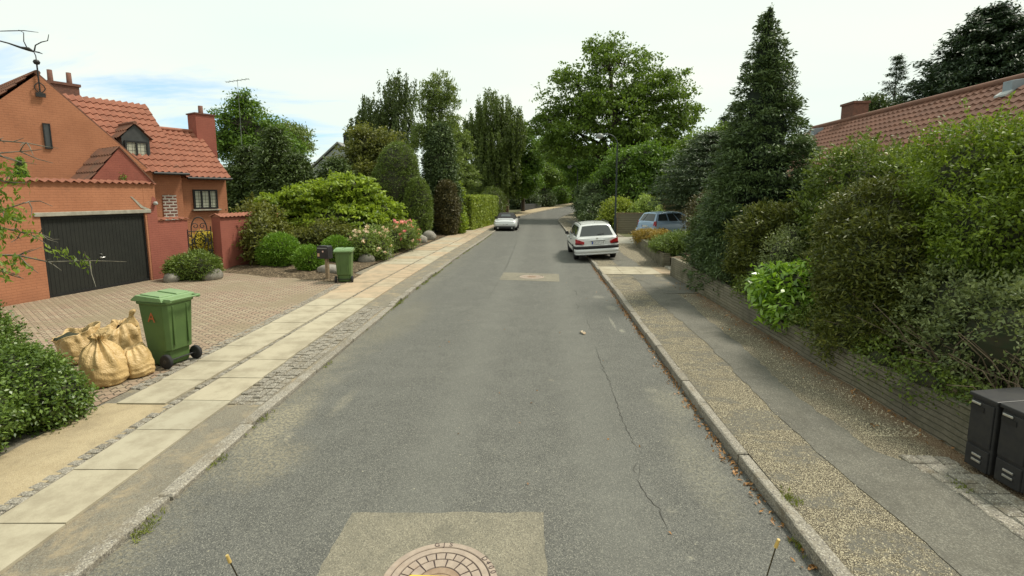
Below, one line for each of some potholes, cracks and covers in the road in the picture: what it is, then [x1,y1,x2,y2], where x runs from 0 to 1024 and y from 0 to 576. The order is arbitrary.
crack [595,348,665,523]
manhole cover [384,542,497,576]
